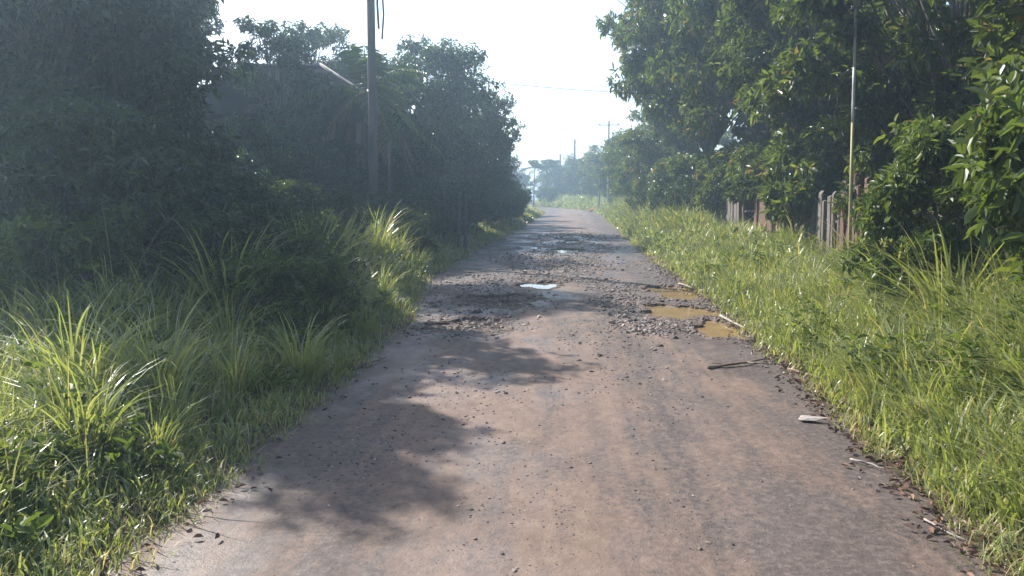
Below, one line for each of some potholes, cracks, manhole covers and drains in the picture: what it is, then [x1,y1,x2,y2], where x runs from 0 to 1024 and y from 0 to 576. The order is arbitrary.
pothole [511,279,566,291]
pothole [689,316,757,342]
pothole [635,283,705,302]
pothole [635,302,729,322]
